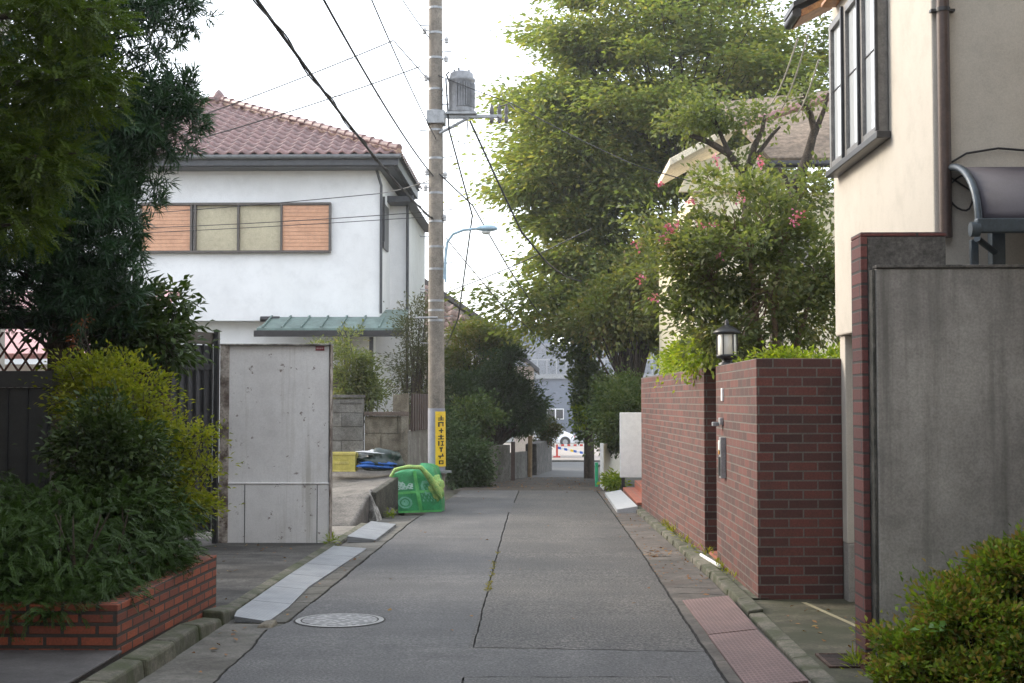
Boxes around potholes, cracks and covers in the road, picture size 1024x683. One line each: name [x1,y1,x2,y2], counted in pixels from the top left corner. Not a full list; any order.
crack [473,491,729,683]
manhole cover [293,613,386,627]
